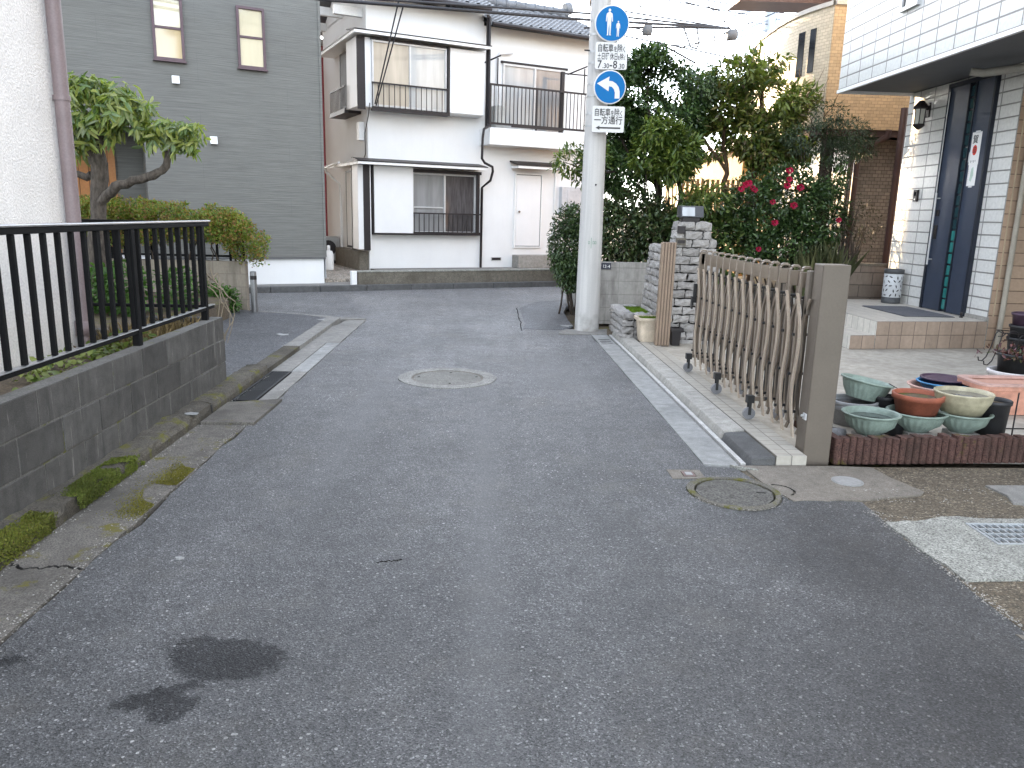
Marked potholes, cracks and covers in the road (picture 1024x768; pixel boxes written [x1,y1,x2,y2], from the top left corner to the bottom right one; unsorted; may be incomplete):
utility cover [667,469,705,487]
manhole cover [686,477,782,511]
drain grate [965,523,1024,545]
drain grate [232,371,291,402]
utility cover [831,476,864,487]
manhole cover [398,368,496,389]
